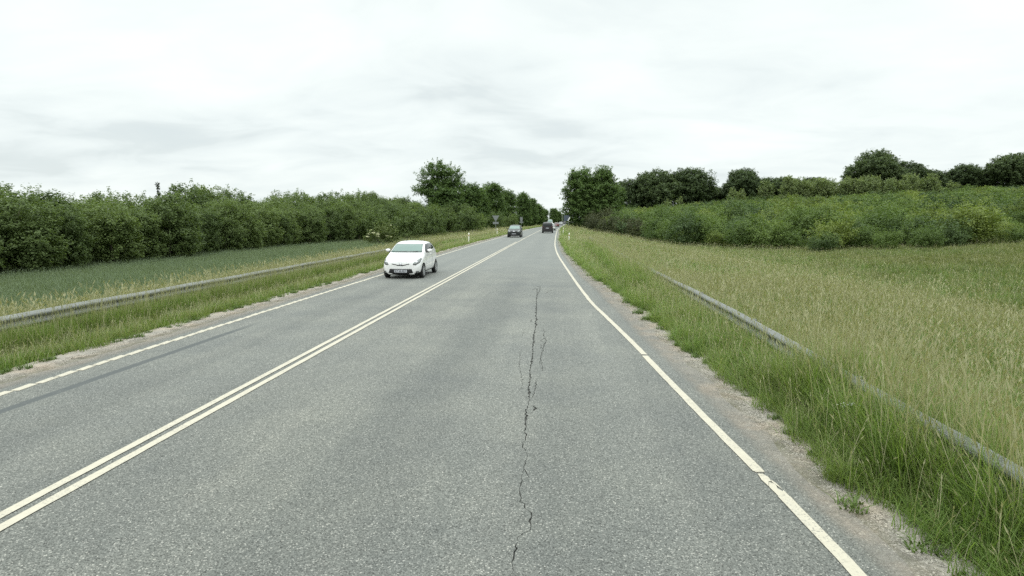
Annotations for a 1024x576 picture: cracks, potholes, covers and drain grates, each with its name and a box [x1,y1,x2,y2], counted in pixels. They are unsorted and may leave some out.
crack [511,286,547,573]
